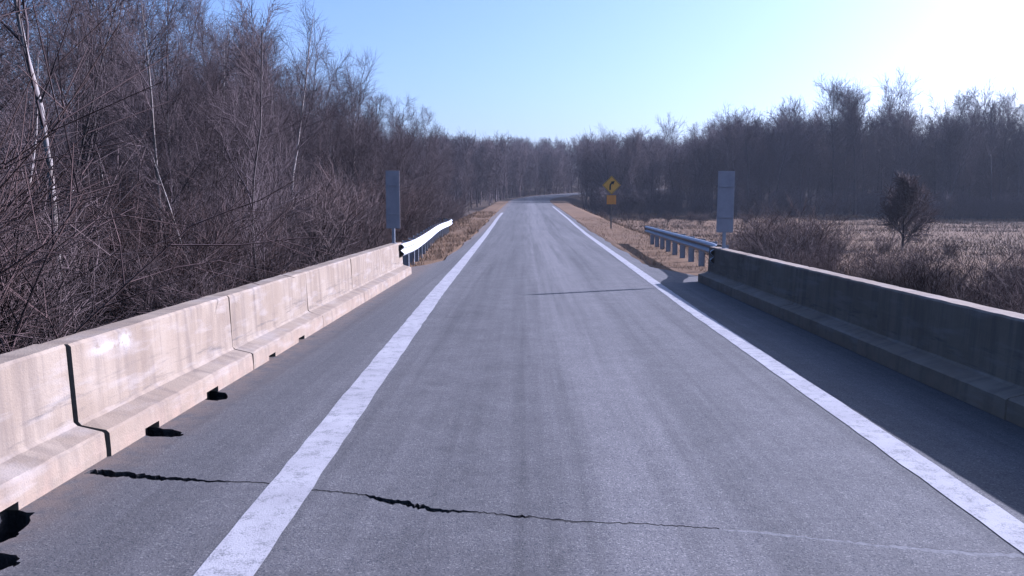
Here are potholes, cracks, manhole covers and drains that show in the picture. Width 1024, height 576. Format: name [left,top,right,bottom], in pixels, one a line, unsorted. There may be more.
crack [84,469,1024,558]
